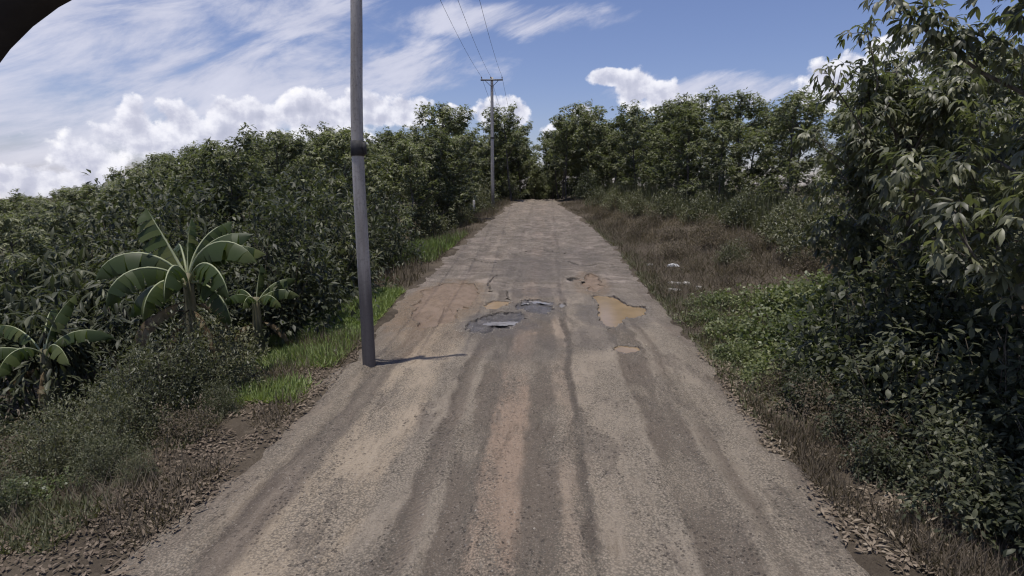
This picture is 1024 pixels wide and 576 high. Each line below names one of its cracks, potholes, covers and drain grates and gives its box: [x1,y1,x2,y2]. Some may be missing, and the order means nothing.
pothole [591,294,653,329]
pothole [507,297,559,316]
pothole [607,344,651,355]
pothole [459,310,533,335]
pothole [478,299,518,311]
pothole [573,273,609,293]
